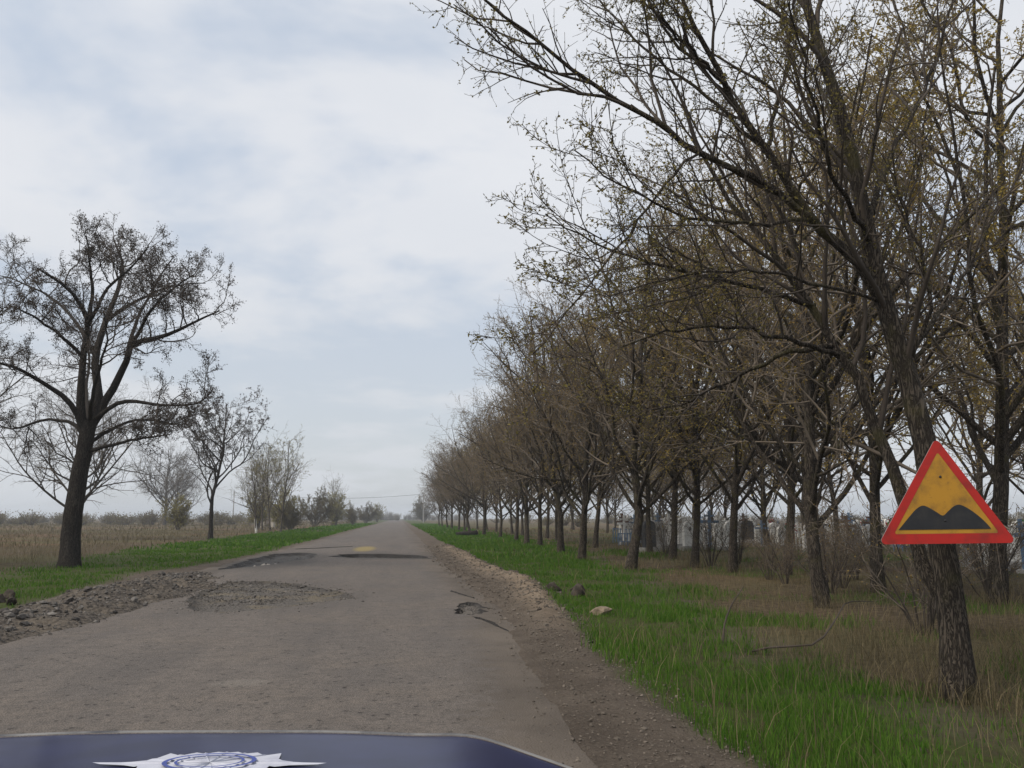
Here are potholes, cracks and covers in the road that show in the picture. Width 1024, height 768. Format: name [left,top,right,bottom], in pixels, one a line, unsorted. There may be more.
pothole [218,553,317,570]
pothole [454,602,489,615]
crack [472,616,509,632]
pothole [155,579,375,616]
